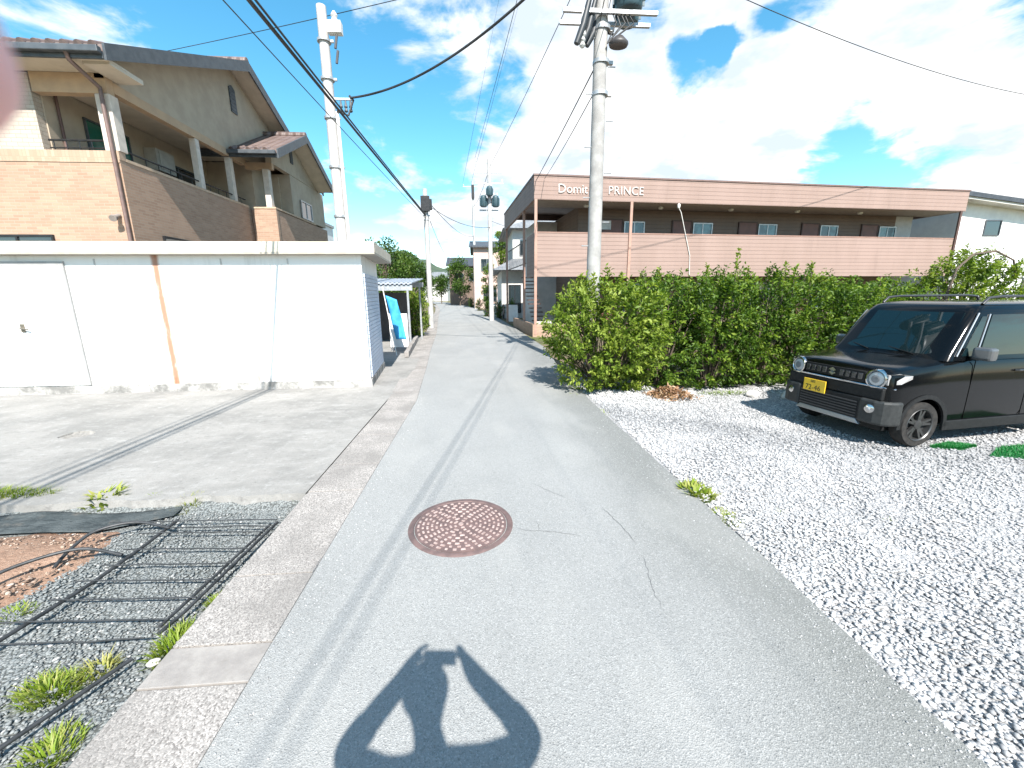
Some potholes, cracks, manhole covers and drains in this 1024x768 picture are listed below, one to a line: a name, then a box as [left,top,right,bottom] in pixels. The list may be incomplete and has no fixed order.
manhole cover [408,499,513,557]
